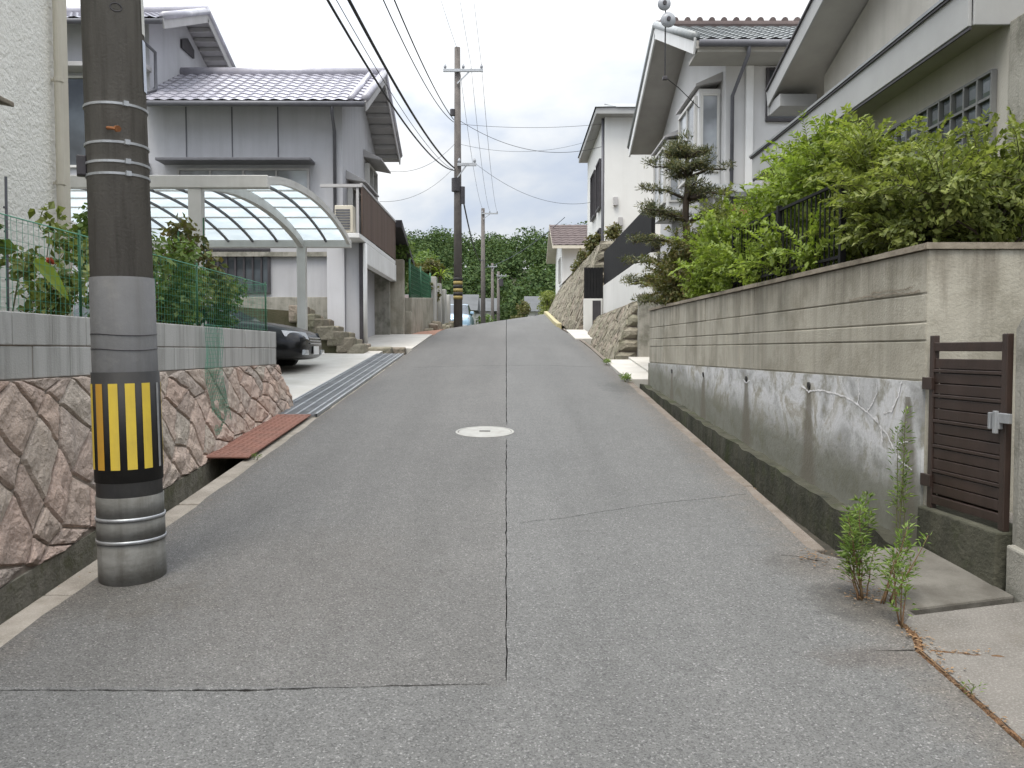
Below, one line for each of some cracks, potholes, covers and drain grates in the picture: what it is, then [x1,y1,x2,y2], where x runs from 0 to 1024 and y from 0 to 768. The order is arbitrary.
drain grate [280,353,404,417]
manhole cover [456,426,514,438]
